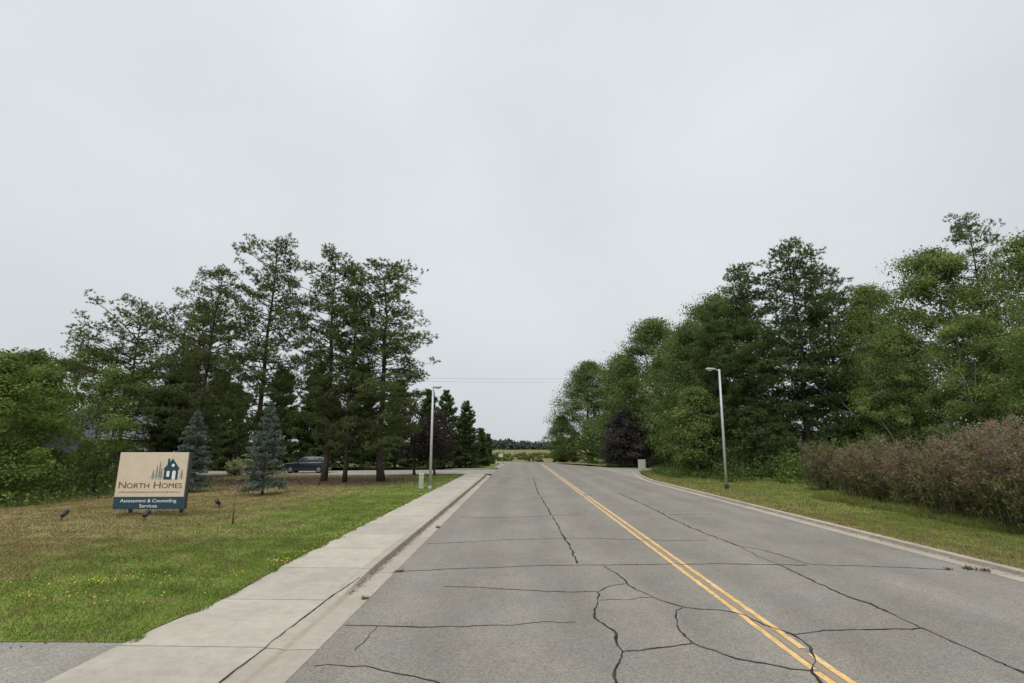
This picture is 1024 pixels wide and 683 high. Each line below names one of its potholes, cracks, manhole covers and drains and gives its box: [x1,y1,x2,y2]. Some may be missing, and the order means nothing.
crack [218,578,568,683]
crack [401,478,1024,683]
